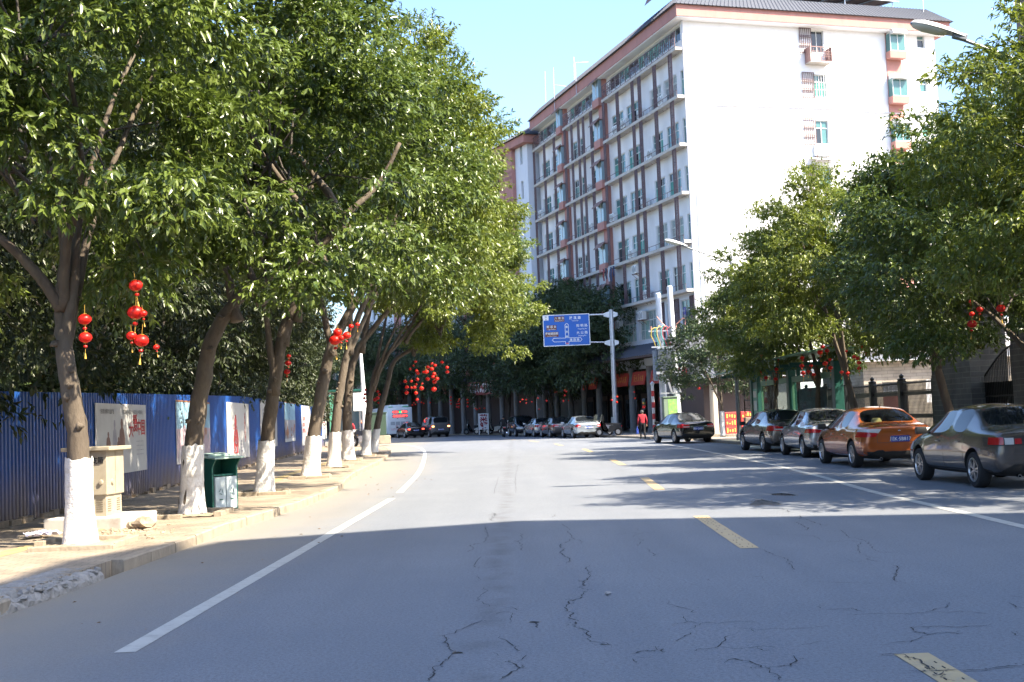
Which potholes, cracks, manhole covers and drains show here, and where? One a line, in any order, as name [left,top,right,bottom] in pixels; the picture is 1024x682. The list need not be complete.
crack [428,588,526,681]
crack [470,513,656,647]
crack [777,508,899,582]
crack [818,596,1024,681]
crack [667,603,815,680]
